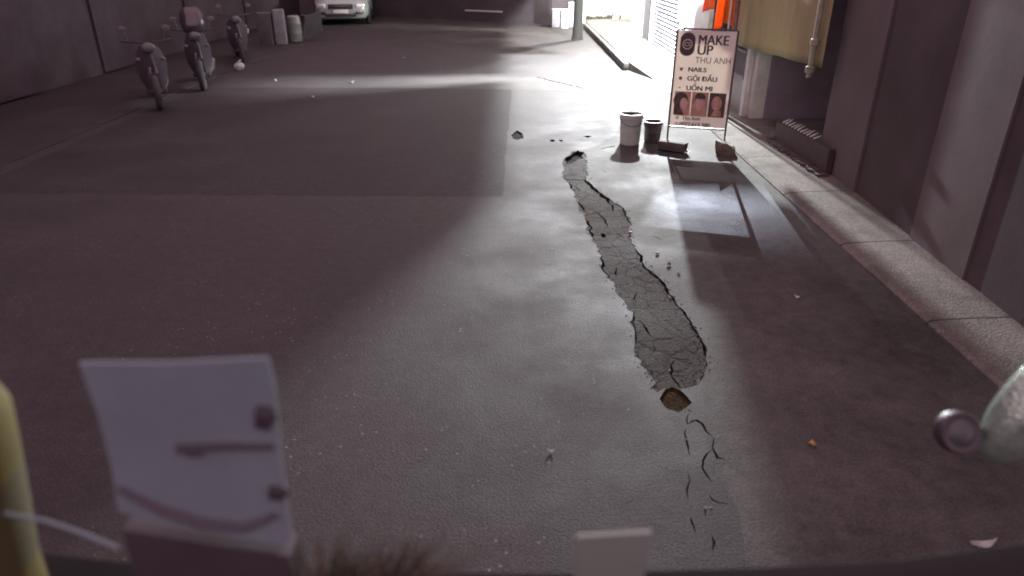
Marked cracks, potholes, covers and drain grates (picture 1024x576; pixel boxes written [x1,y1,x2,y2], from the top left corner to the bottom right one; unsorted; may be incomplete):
crack [684,410,727,551]
pothole [564,150,584,164]
pothole [660,387,692,412]
